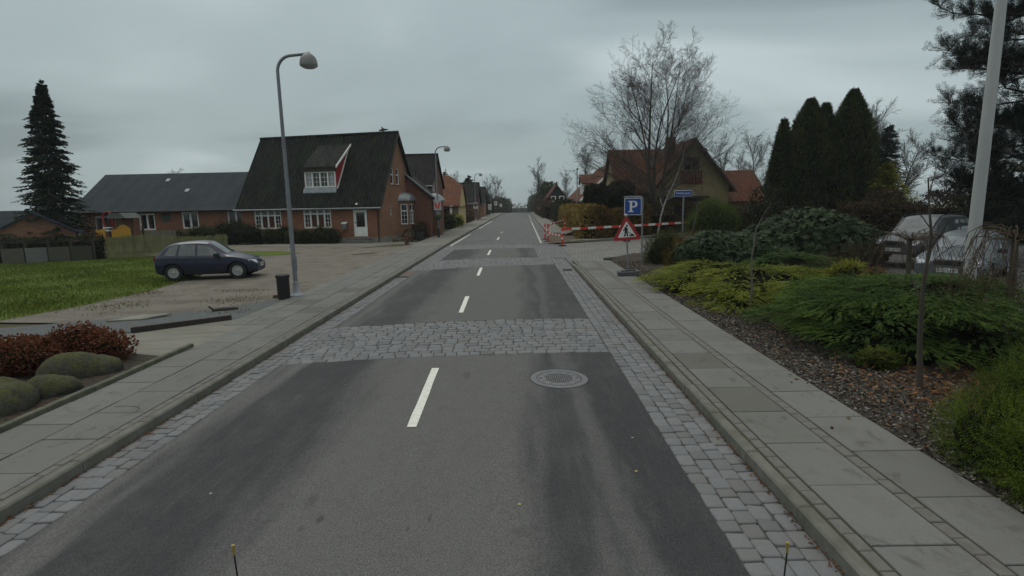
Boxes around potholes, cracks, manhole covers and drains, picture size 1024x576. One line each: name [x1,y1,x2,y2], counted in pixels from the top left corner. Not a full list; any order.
manhole cover [530,369,589,388]
